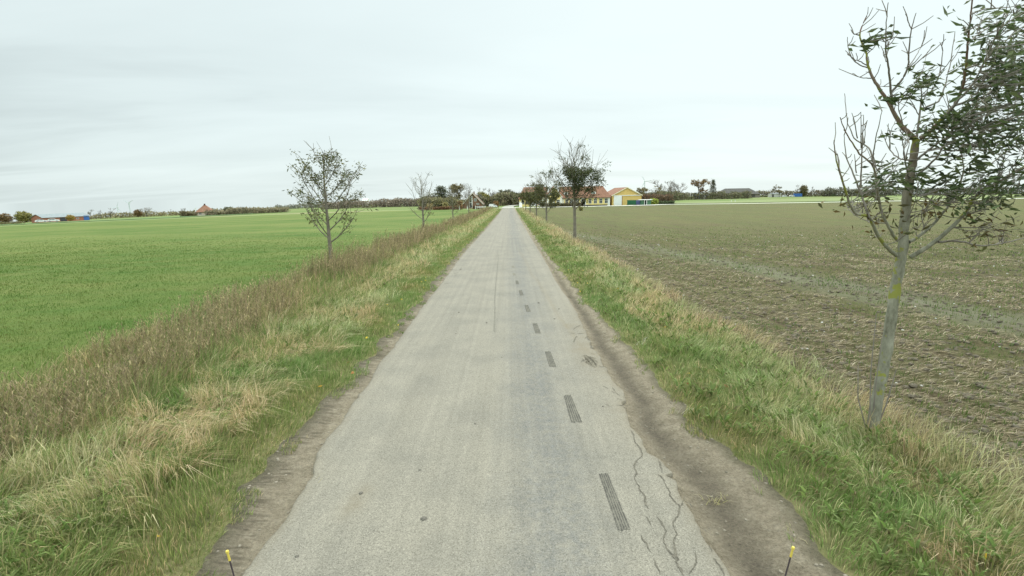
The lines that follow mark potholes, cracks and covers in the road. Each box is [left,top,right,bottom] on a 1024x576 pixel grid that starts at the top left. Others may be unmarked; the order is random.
crack [632,432,724,574]
